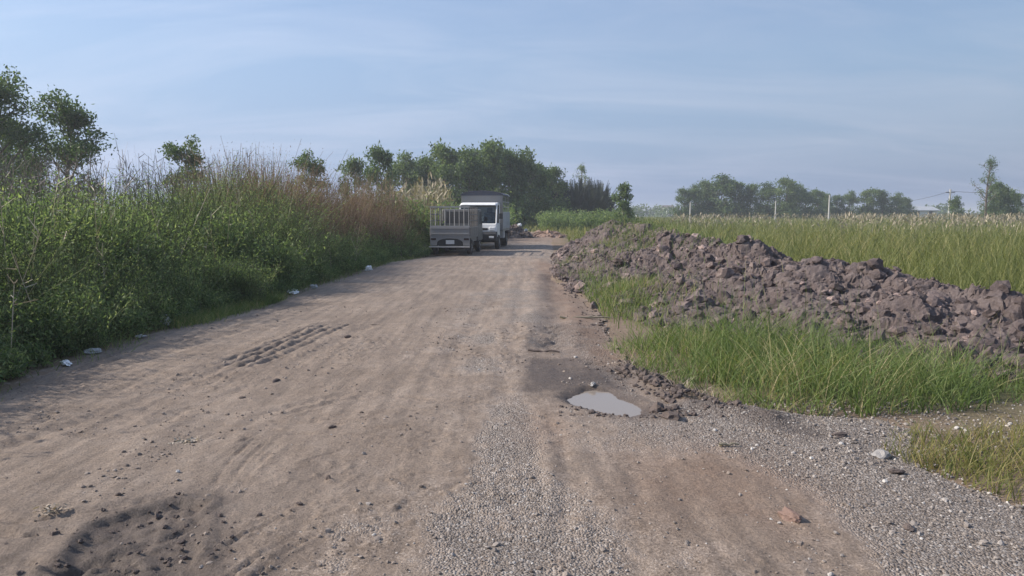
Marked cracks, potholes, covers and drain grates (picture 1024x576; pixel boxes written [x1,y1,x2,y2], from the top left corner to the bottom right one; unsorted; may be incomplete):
pothole [546,382,664,419]
